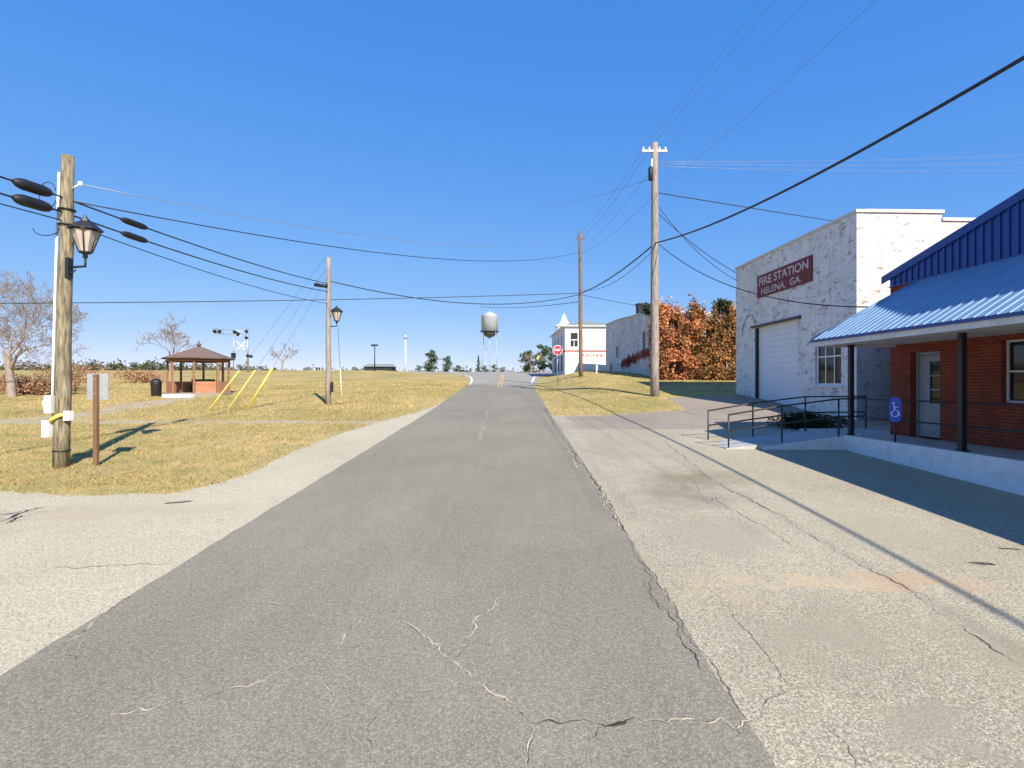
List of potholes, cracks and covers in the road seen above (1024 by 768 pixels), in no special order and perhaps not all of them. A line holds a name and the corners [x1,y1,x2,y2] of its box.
crack [546,411,704,671]
crack [93,584,856,767]
crack [665,442,1018,663]
